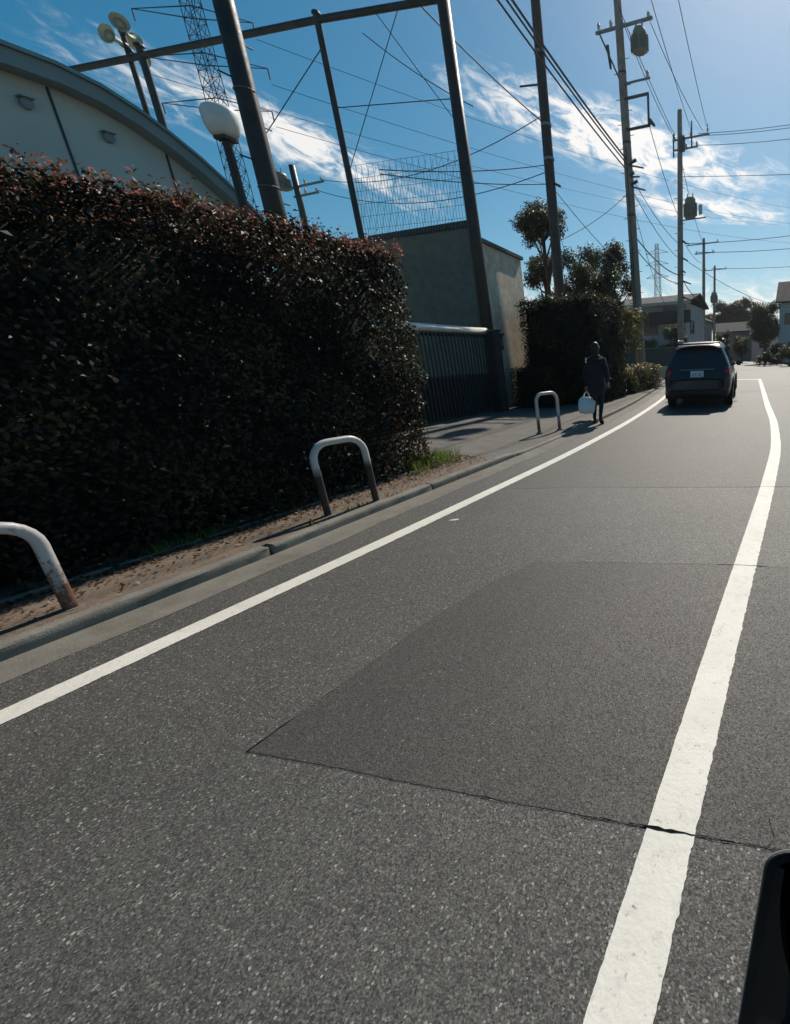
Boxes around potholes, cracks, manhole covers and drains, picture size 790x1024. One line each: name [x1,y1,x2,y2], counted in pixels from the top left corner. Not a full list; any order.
crack [246,627,783,850]
